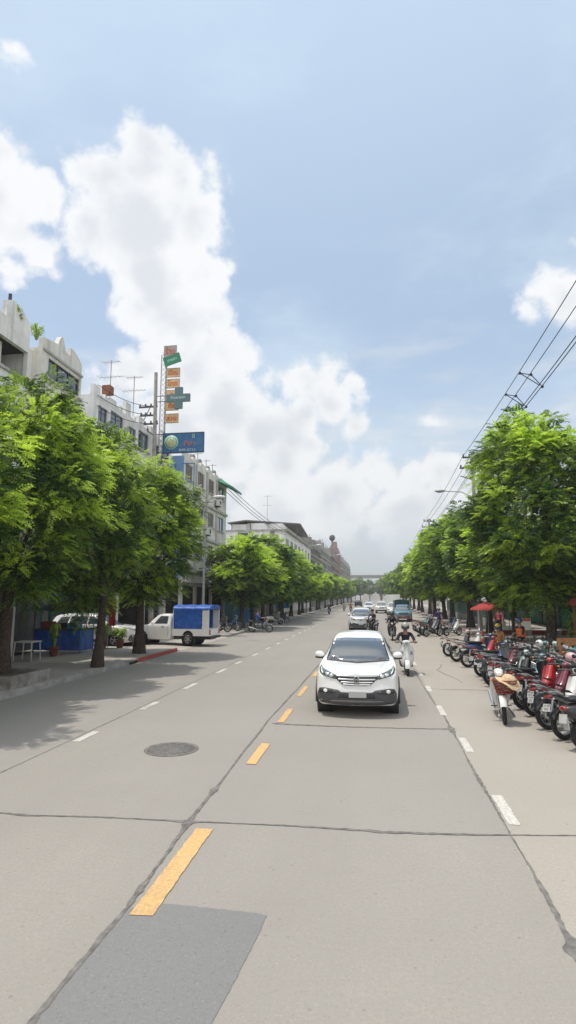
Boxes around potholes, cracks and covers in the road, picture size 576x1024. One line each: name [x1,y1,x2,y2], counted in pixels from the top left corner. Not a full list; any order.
manhole cover [144,742,199,757]
